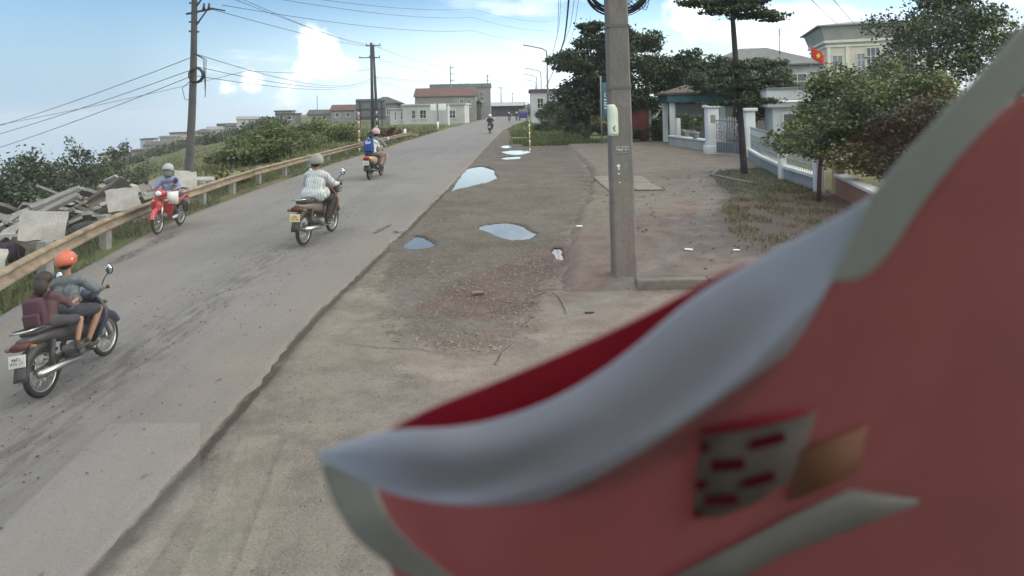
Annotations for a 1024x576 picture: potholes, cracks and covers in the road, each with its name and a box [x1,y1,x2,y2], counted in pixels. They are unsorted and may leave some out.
crack [479,289,568,365]
pothole [466,220,550,244]
pothole [388,233,451,253]
pothole [449,166,505,193]
